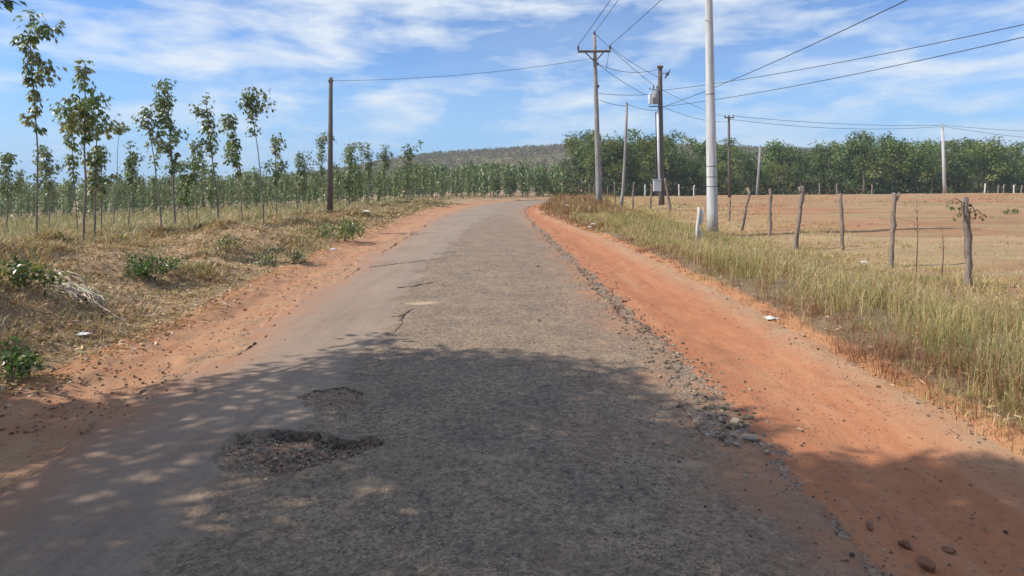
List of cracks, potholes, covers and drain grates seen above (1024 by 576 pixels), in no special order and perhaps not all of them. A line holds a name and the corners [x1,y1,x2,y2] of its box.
crack [373,252,456,267]
pothole [207,429,388,481]
pothole [295,387,367,412]
